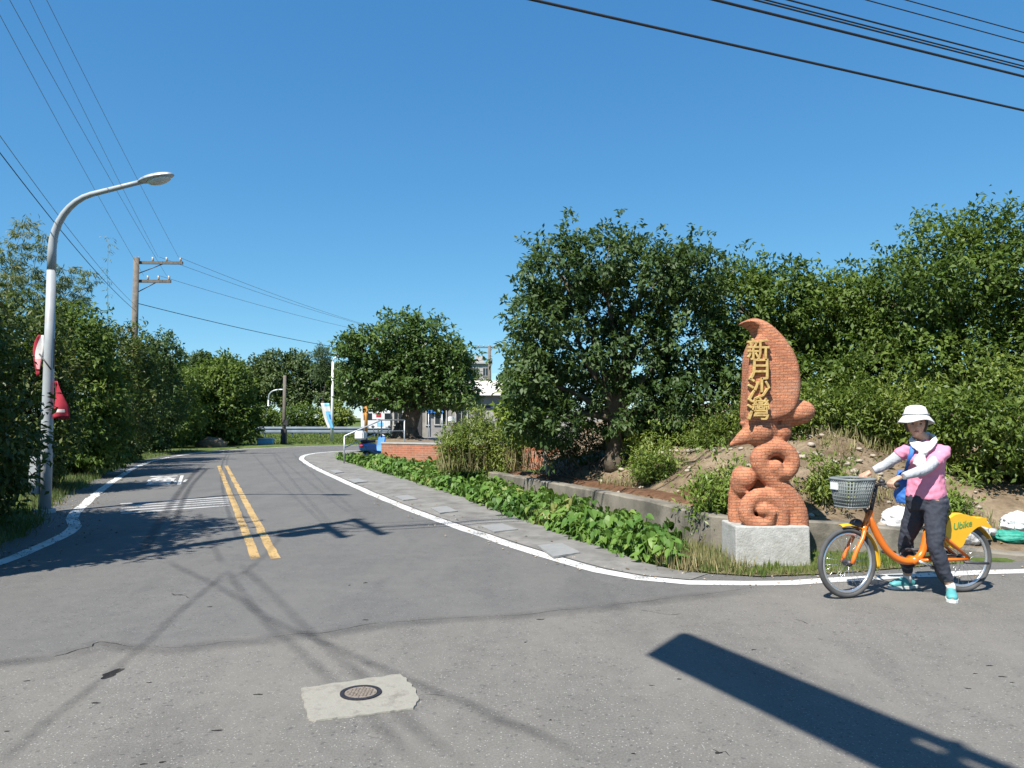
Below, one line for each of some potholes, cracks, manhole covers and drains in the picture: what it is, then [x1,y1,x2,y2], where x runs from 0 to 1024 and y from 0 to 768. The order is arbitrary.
crack [54,642,133,657]
pothole [101,668,125,679]
